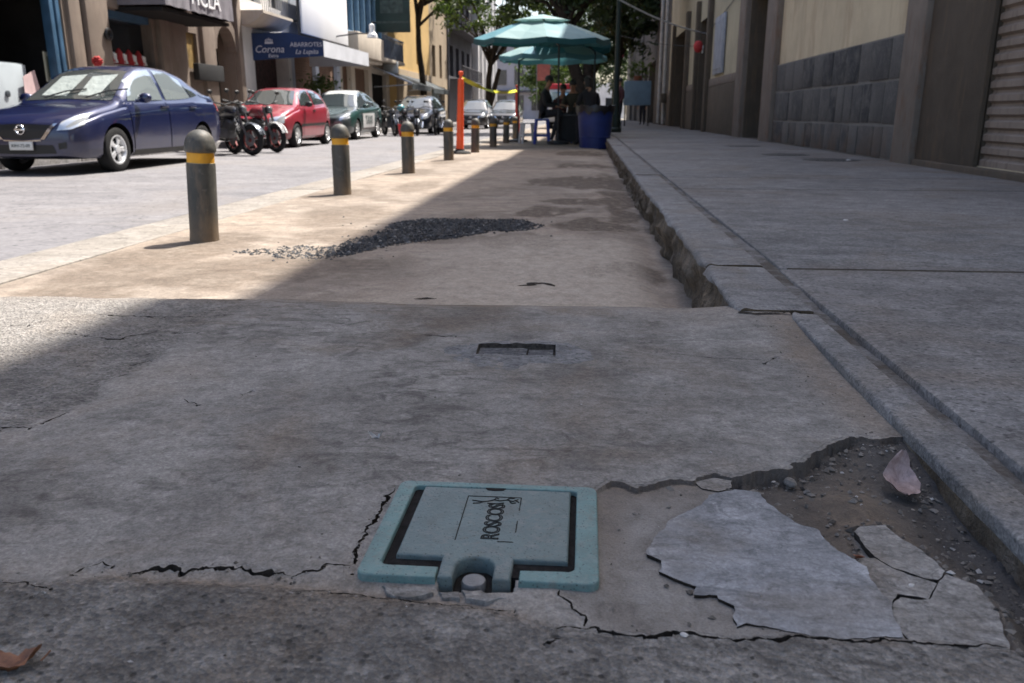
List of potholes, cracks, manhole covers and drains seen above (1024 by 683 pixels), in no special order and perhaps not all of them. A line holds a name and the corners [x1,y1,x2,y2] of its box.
utility cover [357,481,599,593]
crack [0,486,515,613]
pothole [542,435,1024,673]
crack [544,576,1010,650]
